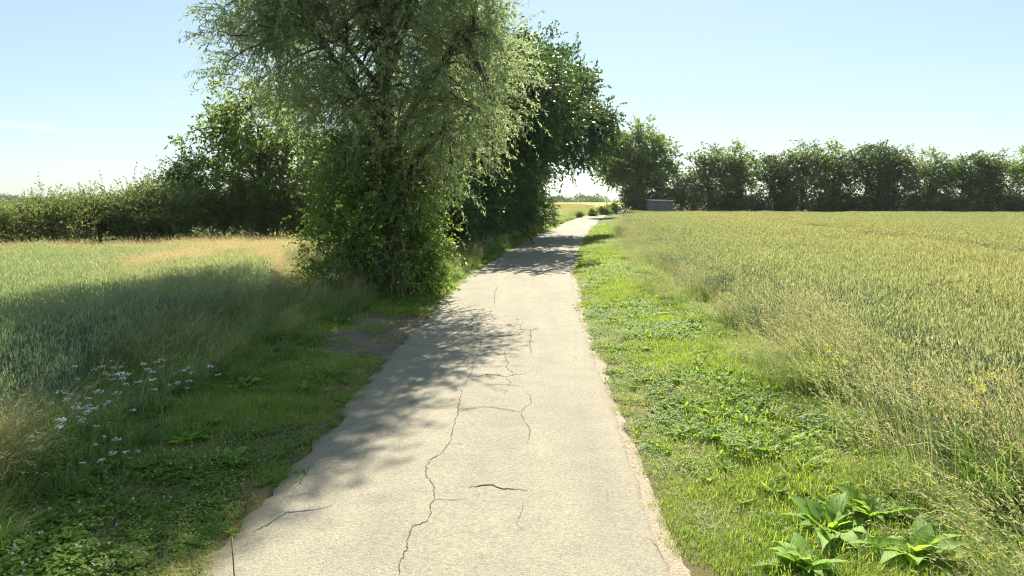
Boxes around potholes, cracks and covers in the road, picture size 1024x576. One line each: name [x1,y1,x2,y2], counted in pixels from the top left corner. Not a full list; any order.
crack [398,341,532,574]
